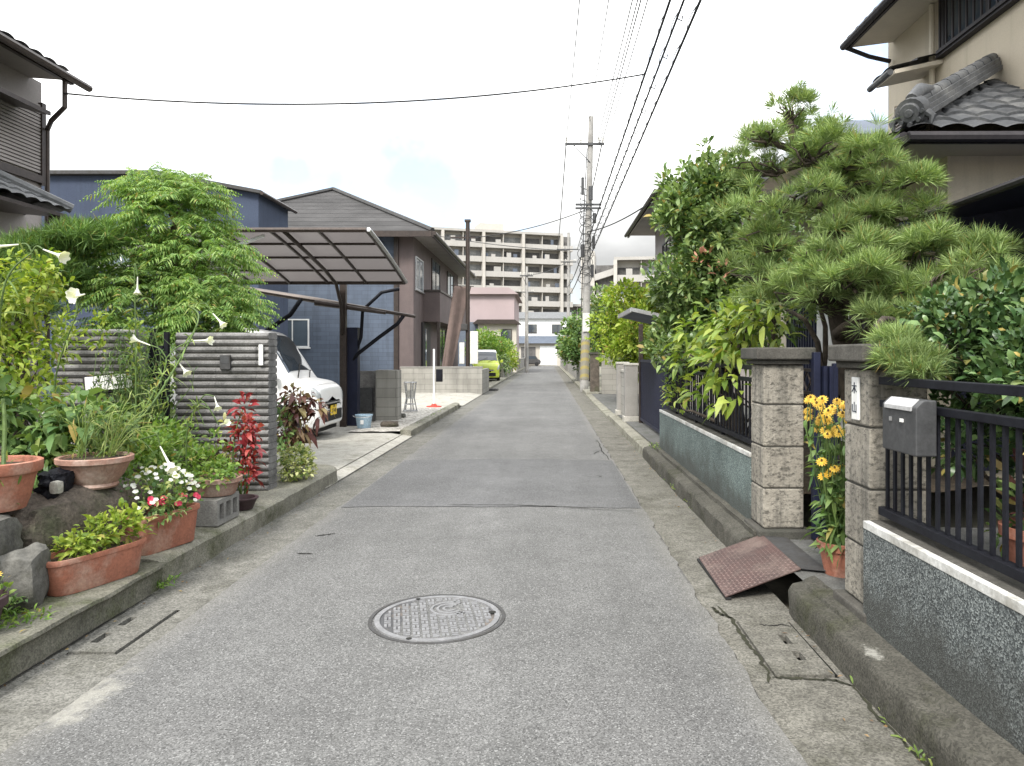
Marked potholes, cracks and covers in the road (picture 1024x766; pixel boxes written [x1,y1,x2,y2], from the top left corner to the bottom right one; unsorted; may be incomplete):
manhole cover [368,594,506,644]
crack [711,606,930,766]
